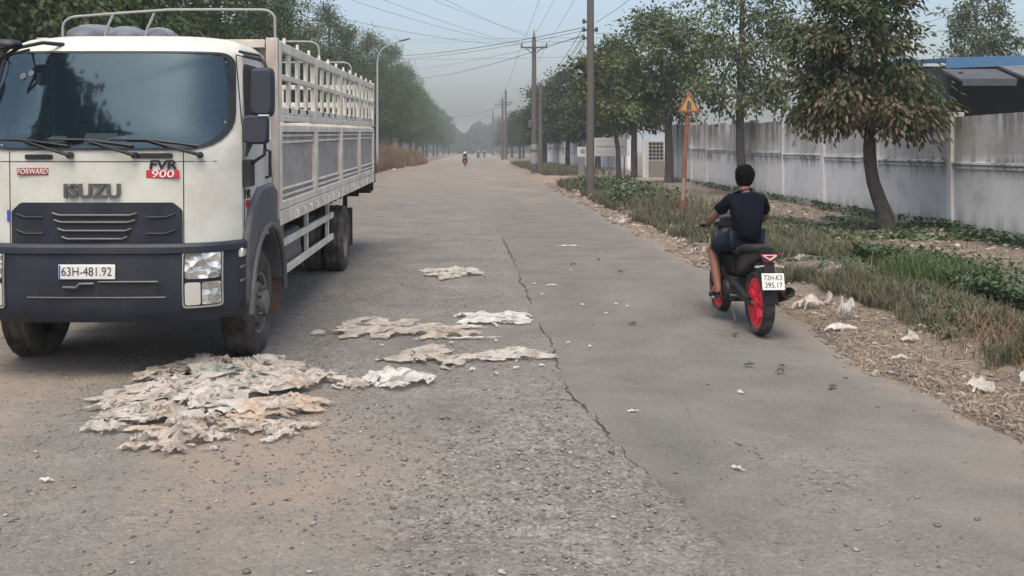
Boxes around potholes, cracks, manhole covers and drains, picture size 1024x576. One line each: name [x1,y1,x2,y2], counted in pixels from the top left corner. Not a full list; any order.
crack [501,236,650,475]
